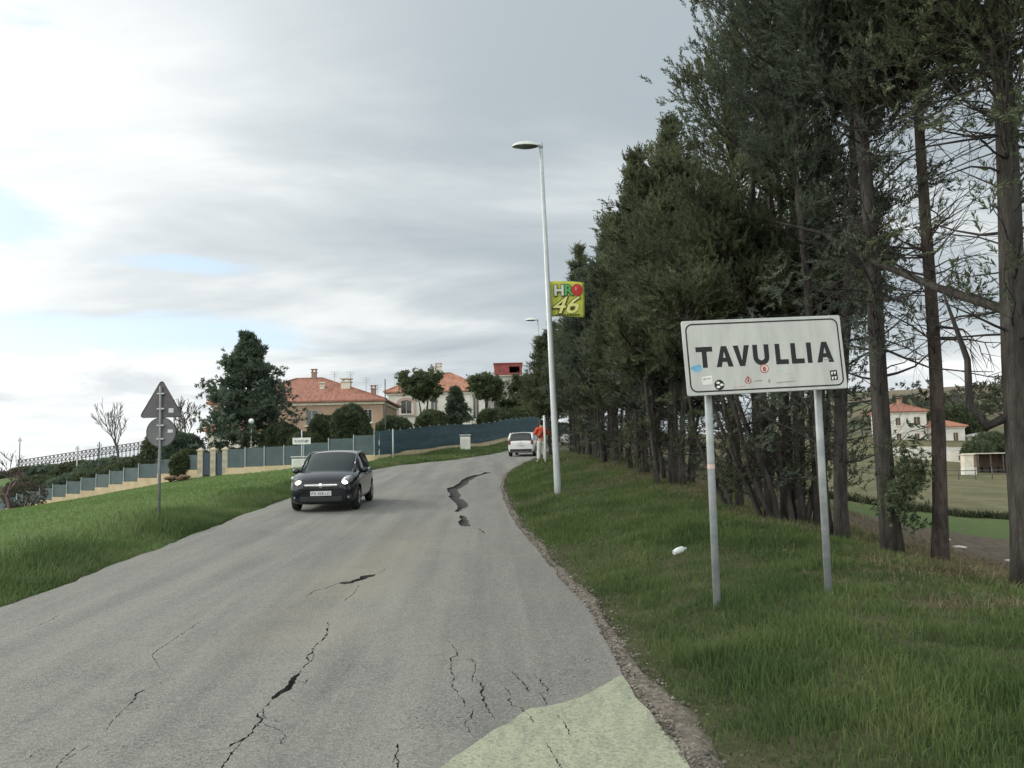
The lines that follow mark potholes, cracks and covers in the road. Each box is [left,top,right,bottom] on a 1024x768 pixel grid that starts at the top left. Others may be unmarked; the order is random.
crack [107,621,201,729]
crack [444,641,576,737]
crack [447,459,491,512]
crack [221,622,330,768]
crack [309,569,385,601]
